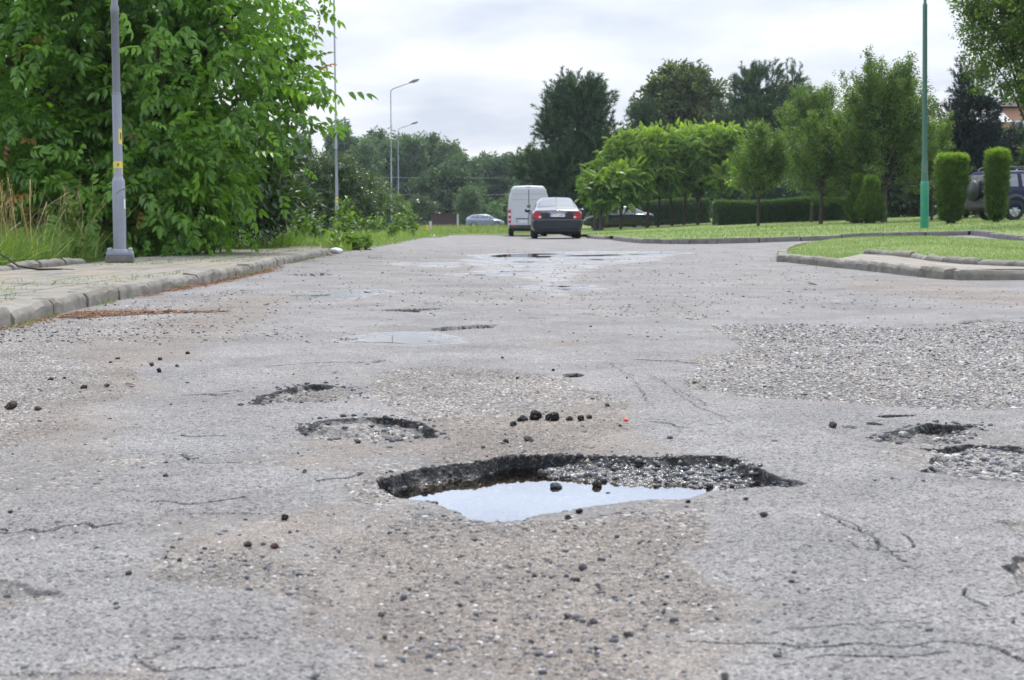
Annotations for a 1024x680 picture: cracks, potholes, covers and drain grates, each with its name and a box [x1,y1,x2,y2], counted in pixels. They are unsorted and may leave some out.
pothole [376,453,808,522]
pothole [250,384,364,405]
crack [0,522,123,534]
crack [608,359,732,428]
pothole [916,444,1024,481]
crack [150,496,247,505]
crack [820,512,918,570]
crack [686,617,1024,663]
pothole [878,423,983,444]
pothole [294,417,439,440]
